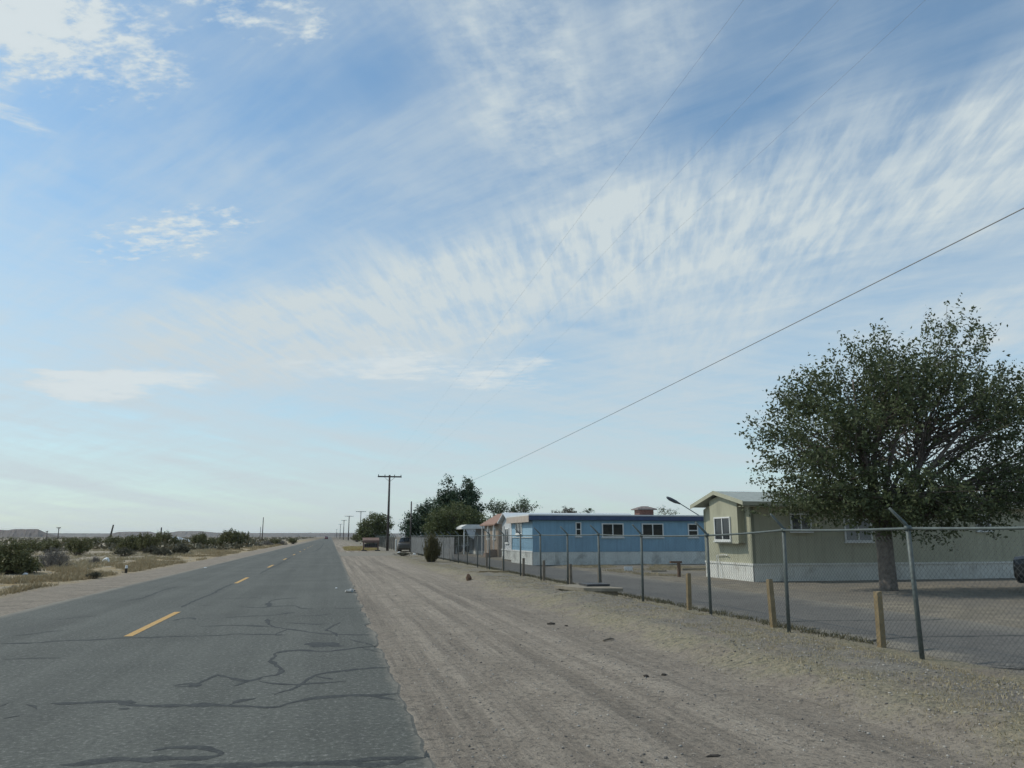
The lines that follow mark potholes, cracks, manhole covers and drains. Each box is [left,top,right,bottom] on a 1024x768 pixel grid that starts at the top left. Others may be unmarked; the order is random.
crack [0,605,351,660]
